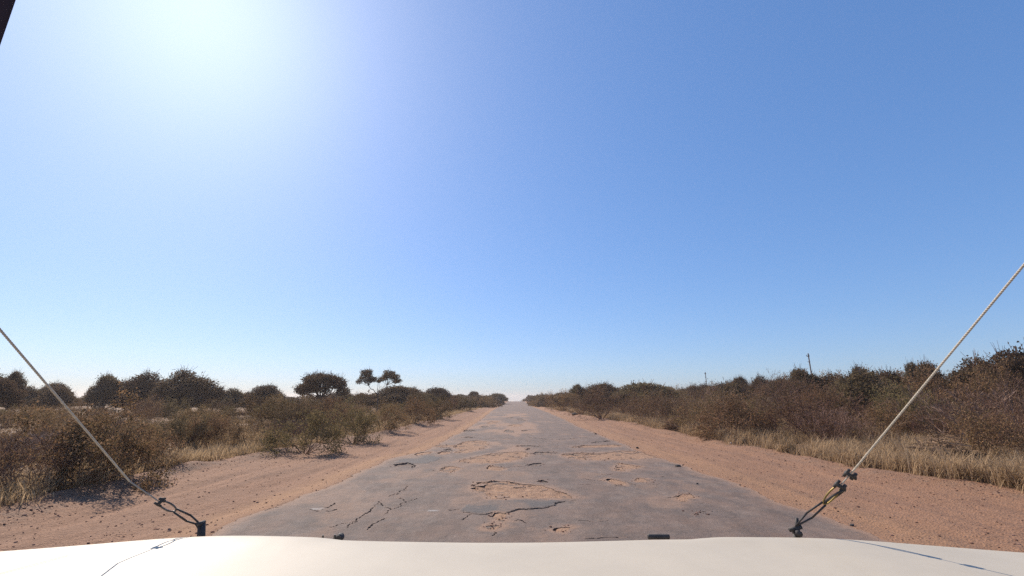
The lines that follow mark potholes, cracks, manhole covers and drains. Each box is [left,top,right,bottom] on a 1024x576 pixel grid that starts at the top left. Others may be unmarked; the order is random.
pothole [453,441,488,453]
crack [450,474,686,536]
crack [265,486,417,530]
pothole [562,451,657,460]
pothole [459,452,528,464]
pothole [470,481,572,499]
pothole [615,463,641,471]
